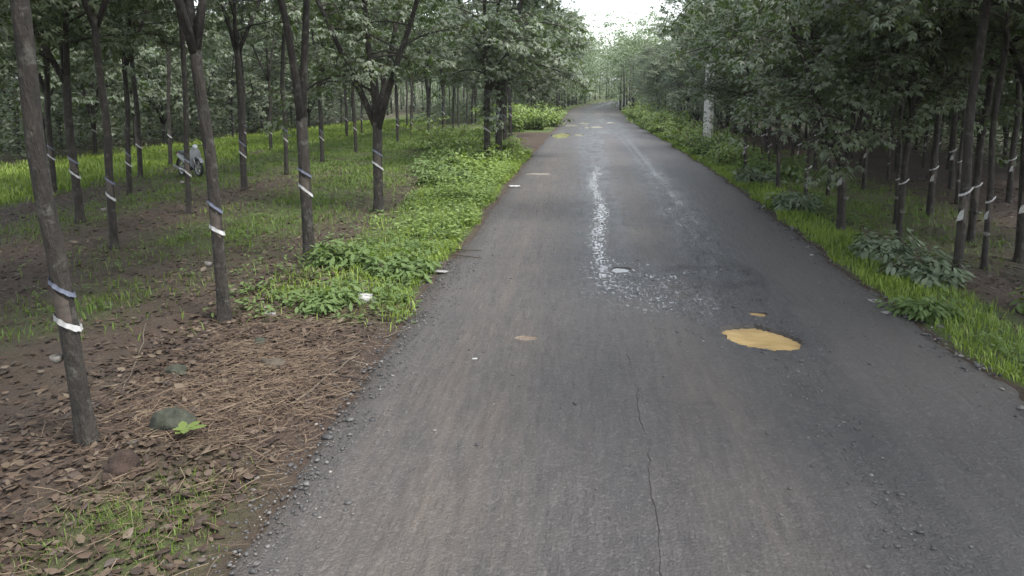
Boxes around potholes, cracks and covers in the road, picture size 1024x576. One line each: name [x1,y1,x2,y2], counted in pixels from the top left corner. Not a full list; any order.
crack [626,347,662,576]
